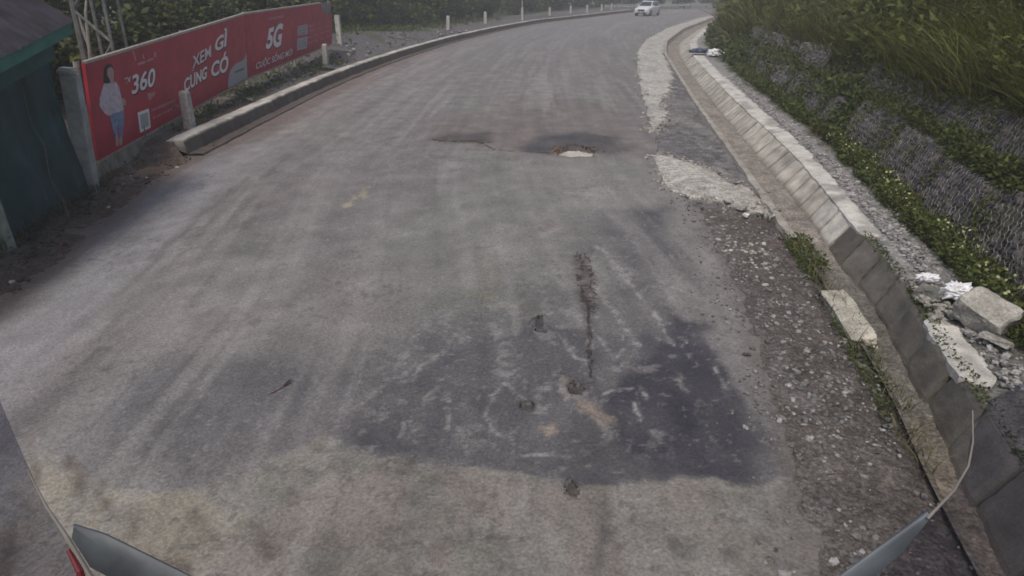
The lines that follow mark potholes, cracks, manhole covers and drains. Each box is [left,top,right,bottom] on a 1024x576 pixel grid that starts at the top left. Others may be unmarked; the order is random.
pothole [516,399,538,412]
crack [572,252,600,378]
pothole [562,476,584,500]
pothole [526,313,552,335]
pothole [549,144,604,158]
pothole [563,380,589,397]
